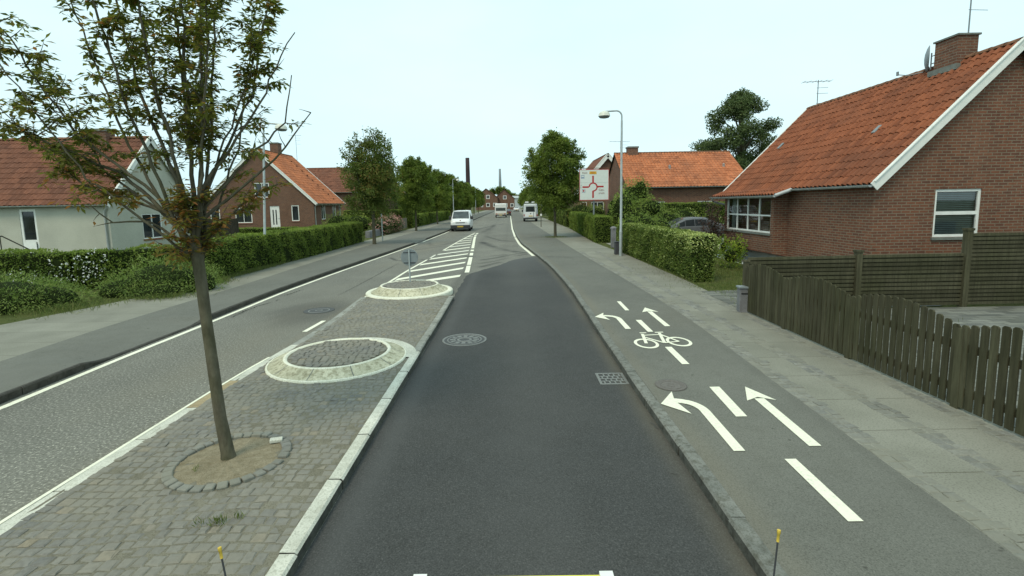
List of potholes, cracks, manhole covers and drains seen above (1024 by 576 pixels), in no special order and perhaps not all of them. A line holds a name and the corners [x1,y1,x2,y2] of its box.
manhole cover [655,379,687,391]
drain grate [595,373,629,385]
manhole cover [442,334,487,346]
